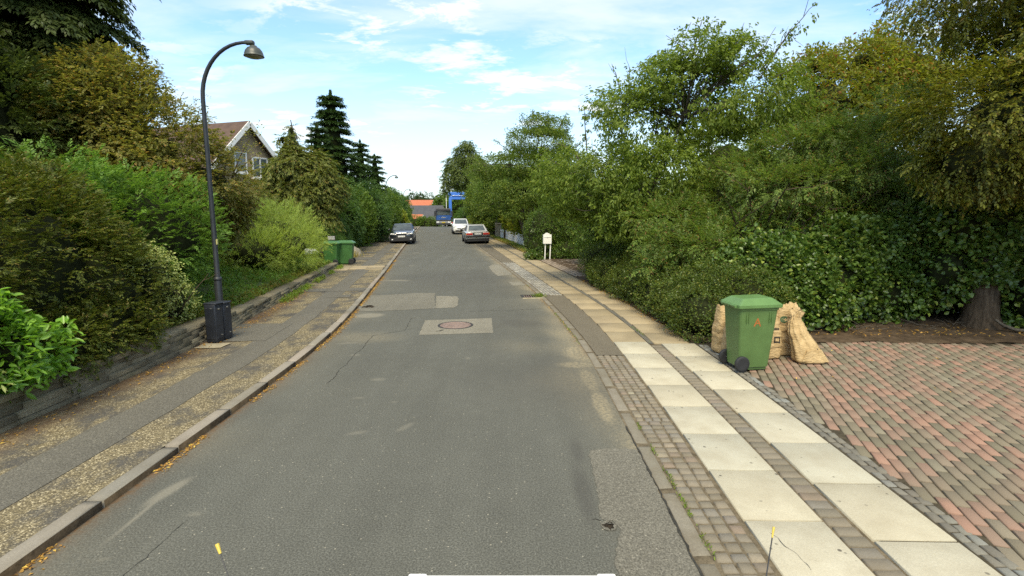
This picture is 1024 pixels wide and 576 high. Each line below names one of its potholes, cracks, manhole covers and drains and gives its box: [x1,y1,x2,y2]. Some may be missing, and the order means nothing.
manhole cover [438,321,473,329]
pothole [601,521,617,531]
